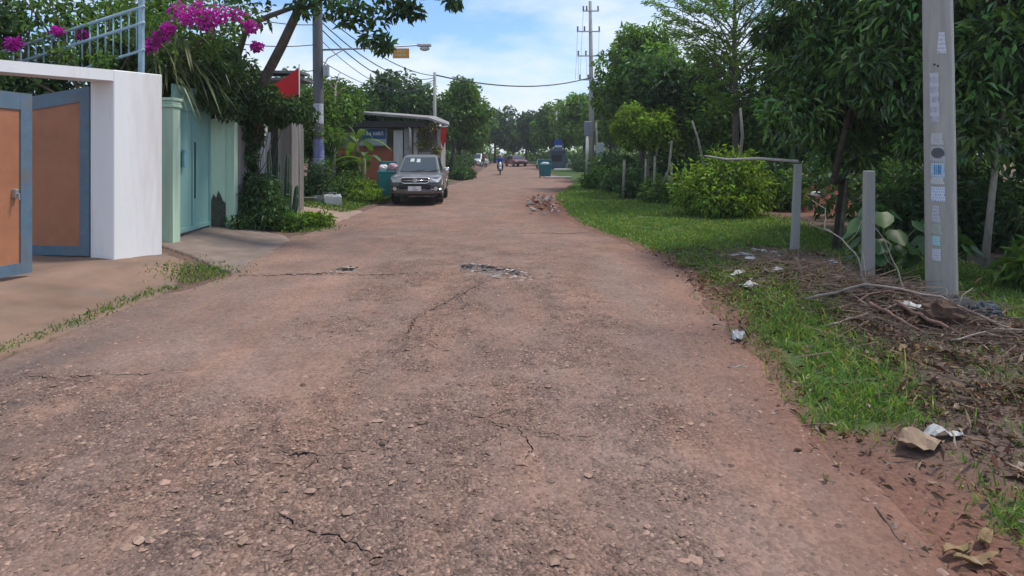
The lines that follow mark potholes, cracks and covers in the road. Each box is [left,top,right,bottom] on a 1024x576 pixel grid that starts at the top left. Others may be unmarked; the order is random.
crack [21,369,187,382]
crack [238,272,483,352]
pothole [448,263,535,281]
crack [463,406,596,466]
crack [235,448,356,474]
crack [264,511,405,570]
